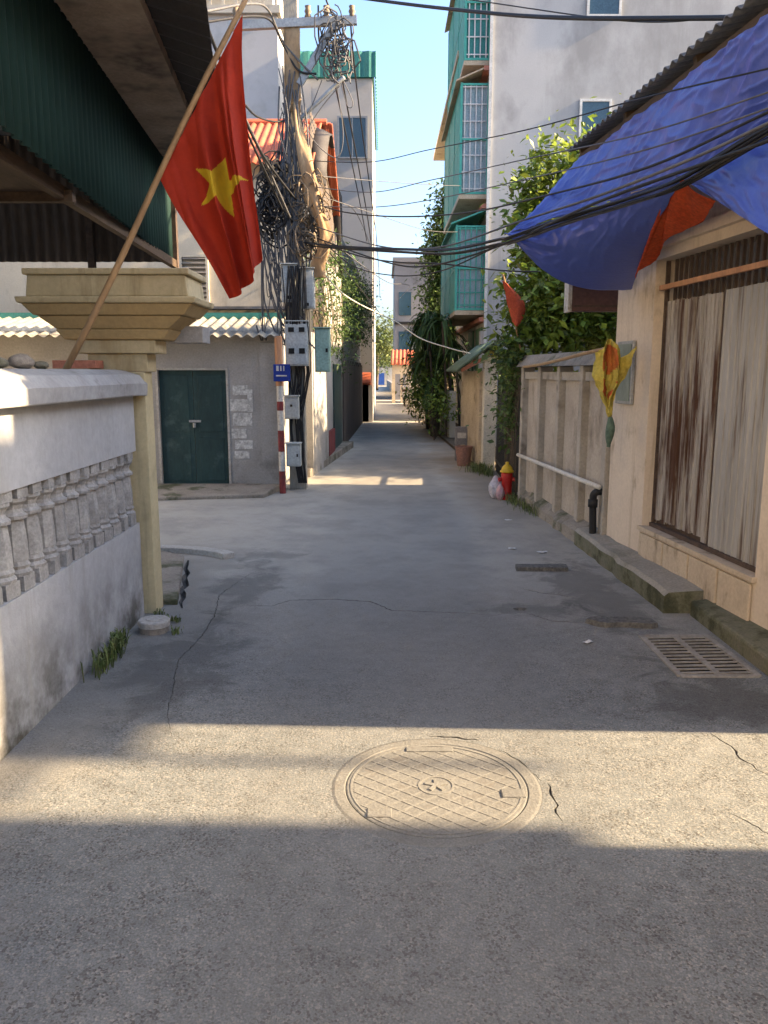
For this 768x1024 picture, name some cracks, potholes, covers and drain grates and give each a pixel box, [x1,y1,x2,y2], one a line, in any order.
crack [710,733,766,774]
crack [258,599,505,616]
crack [167,560,242,736]
drain grate [638,634,762,678]
manhole cover [332,739,543,848]
crack [429,736,563,822]
